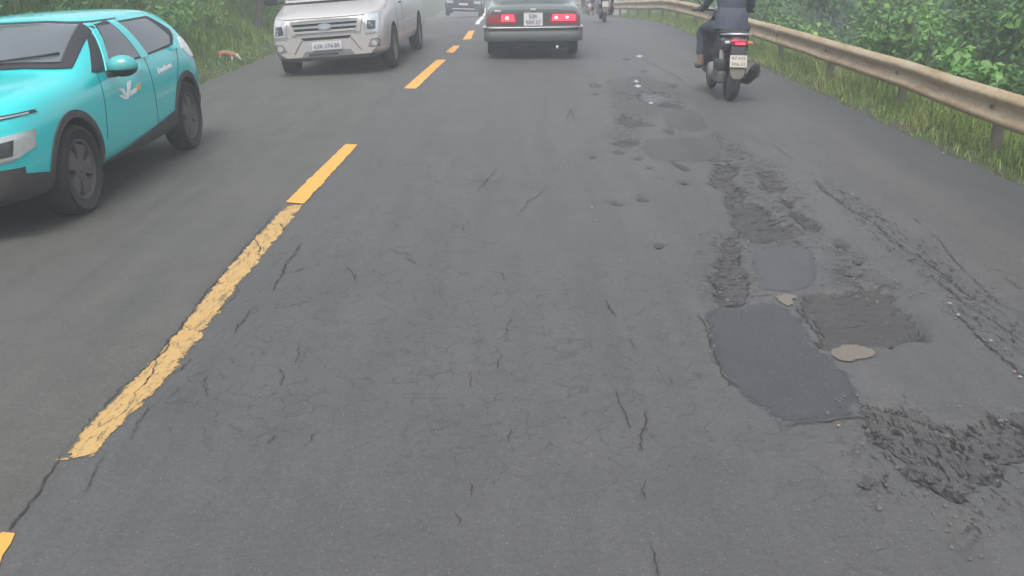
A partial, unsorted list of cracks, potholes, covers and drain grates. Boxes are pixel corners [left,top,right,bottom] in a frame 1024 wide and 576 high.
pothole [756,171,787,193]
pothole [723,191,745,210]
pothole [709,238,751,308]
crack [813,178,1023,375]
pothole [709,163,742,192]
crack [639,408,648,450]
pothole [858,475,876,489]
pothole [861,402,1024,503]
pothole [779,200,822,232]
pothole [730,203,794,243]
